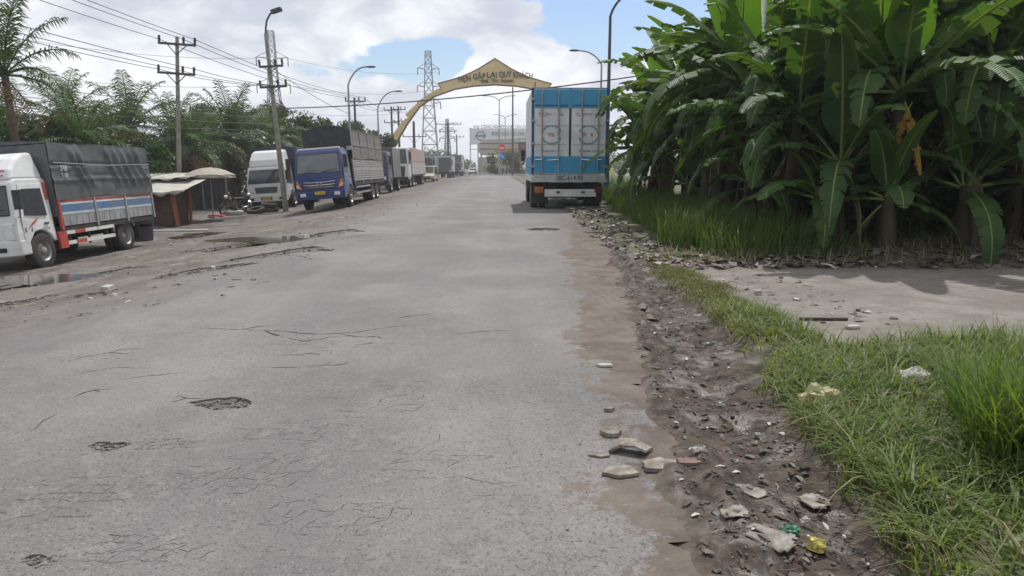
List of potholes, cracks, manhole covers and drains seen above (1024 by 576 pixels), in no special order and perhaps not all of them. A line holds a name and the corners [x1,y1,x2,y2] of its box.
pothole [197,229,364,253]
crack [177,418,330,494]
crack [70,348,174,380]
crack [383,436,496,496]
pothole [170,235,294,255]
crack [120,438,199,450]
pothole [186,397,252,410]
pothole [89,441,131,452]
crack [59,534,212,563]
crack [306,381,427,418]
crack [2,476,155,524]
crack [257,495,415,535]
